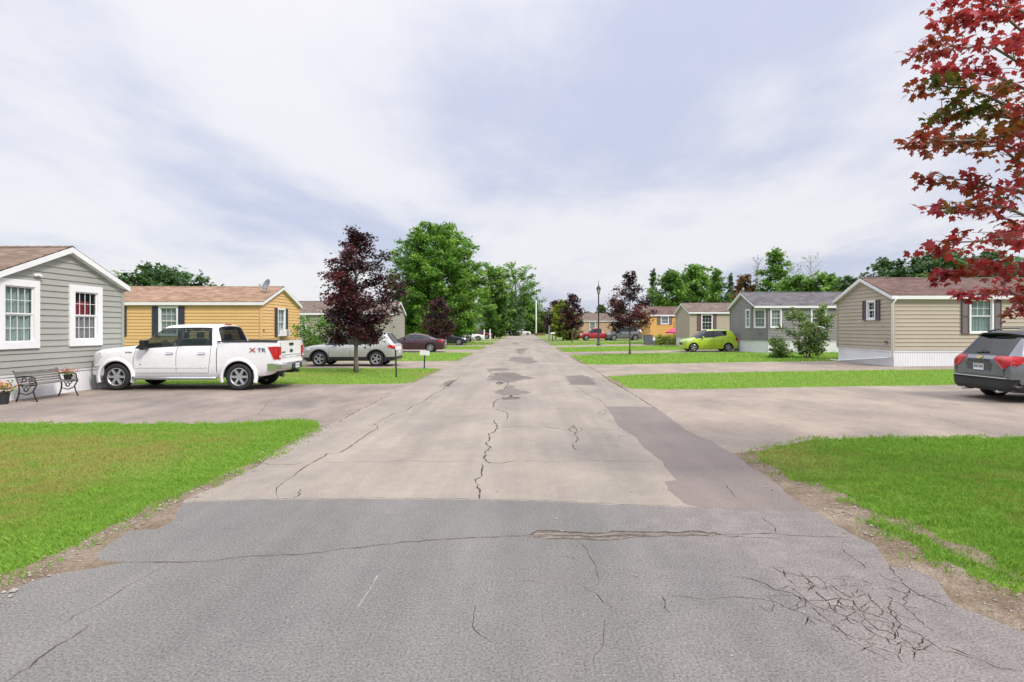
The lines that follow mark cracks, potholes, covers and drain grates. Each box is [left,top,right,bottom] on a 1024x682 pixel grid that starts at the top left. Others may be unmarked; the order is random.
crack [269,375,461,498]
crack [662,566,1021,671]
crack [7,486,866,682]
crack [474,373,653,499]
